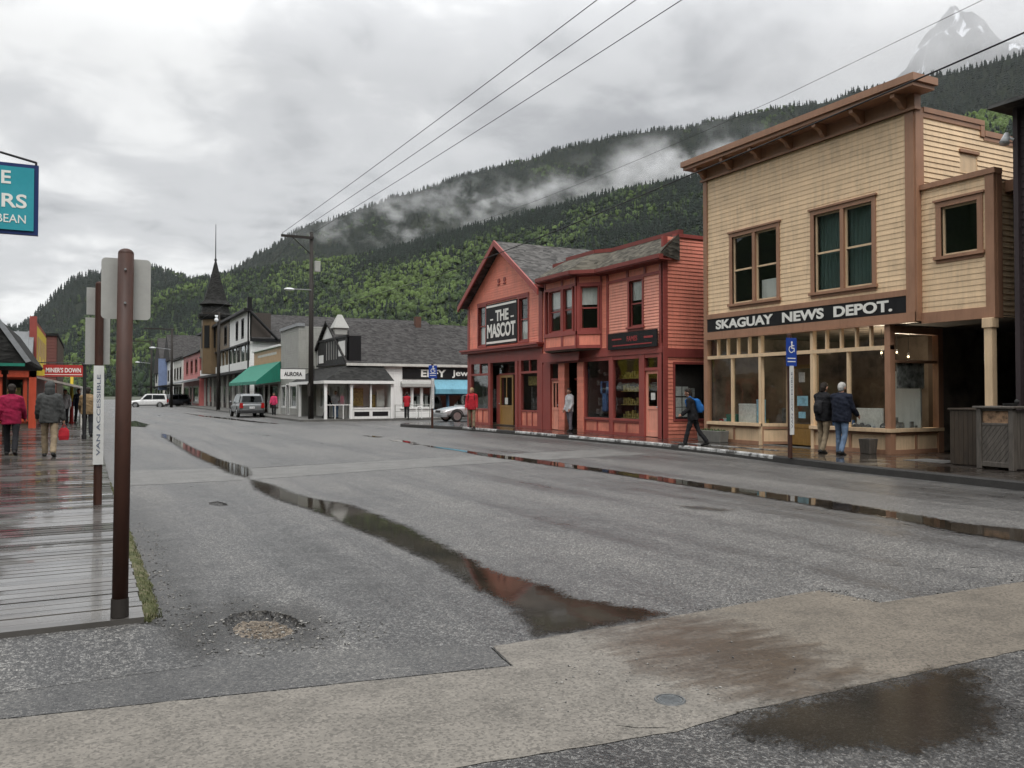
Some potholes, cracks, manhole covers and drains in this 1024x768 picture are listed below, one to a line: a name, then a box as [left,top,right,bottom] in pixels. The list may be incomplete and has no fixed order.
manhole cover [654,694,686,706]
pothole [222,611,306,639]
